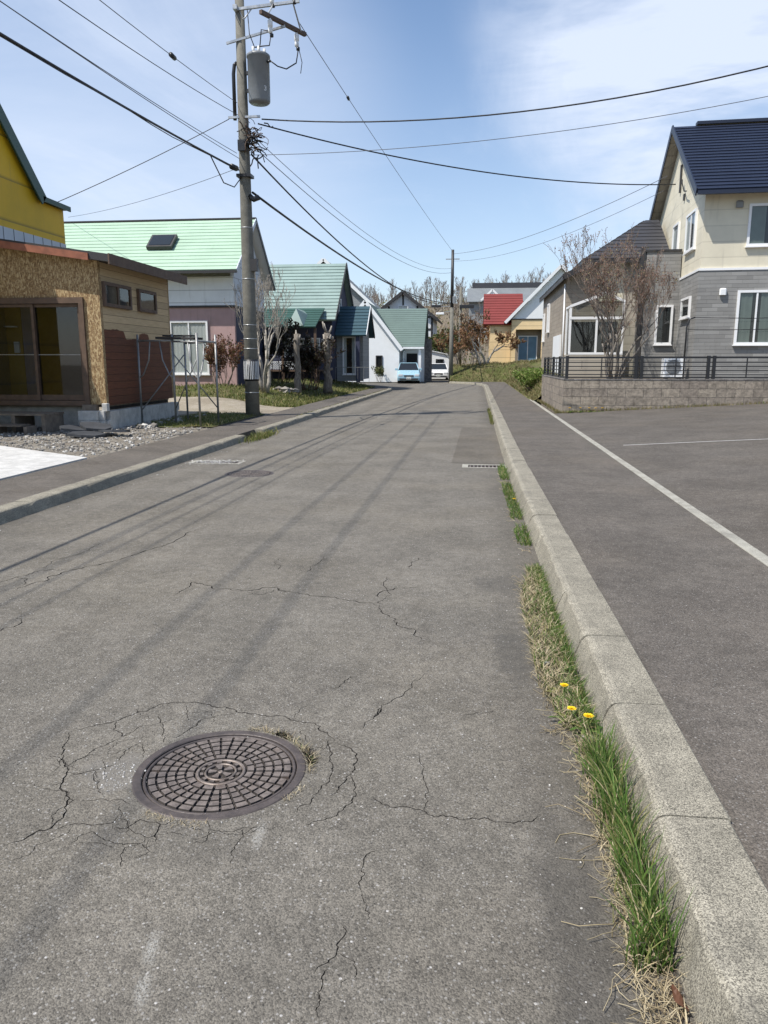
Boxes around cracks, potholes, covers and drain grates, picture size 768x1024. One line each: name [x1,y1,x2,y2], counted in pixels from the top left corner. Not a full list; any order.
crack [375,753,540,824]
crack [1,527,205,590]
crack [3,702,358,865]
crack [363,677,422,728]
crack [175,559,424,641]
crack [358,851,374,917]
manhole cover [132,731,306,832]
